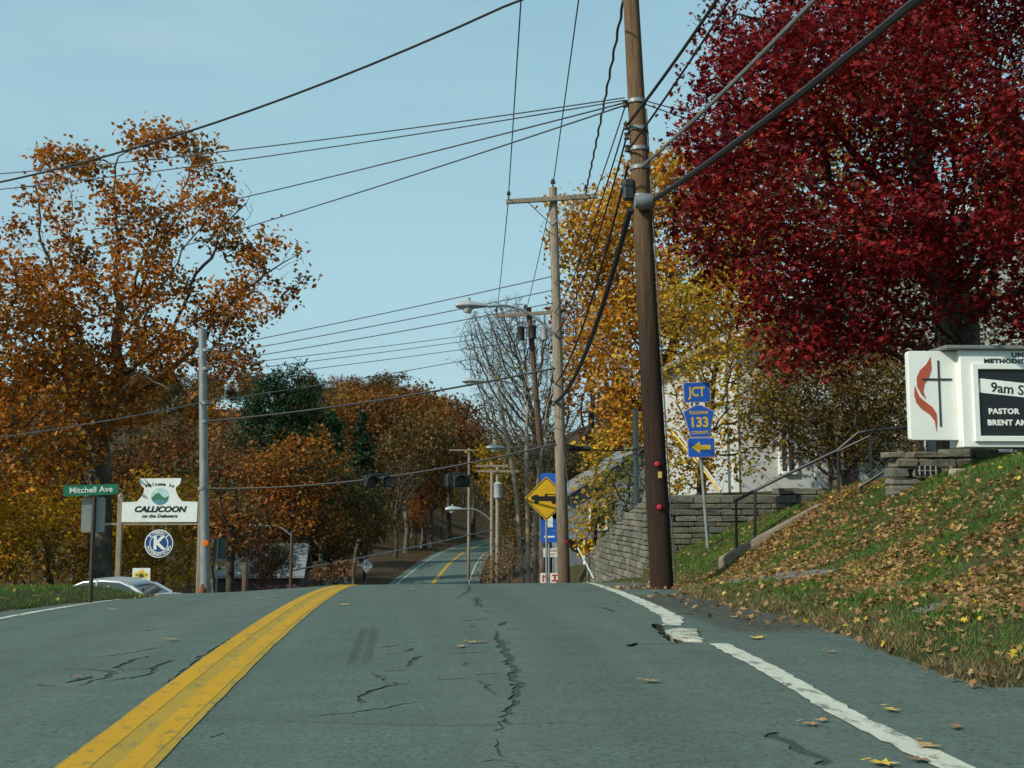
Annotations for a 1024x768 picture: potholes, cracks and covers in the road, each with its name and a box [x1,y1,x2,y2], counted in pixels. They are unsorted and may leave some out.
crack [763,732,834,766]
crack [212,597,678,768]
pothole [650,624,683,643]
crack [40,629,234,687]
